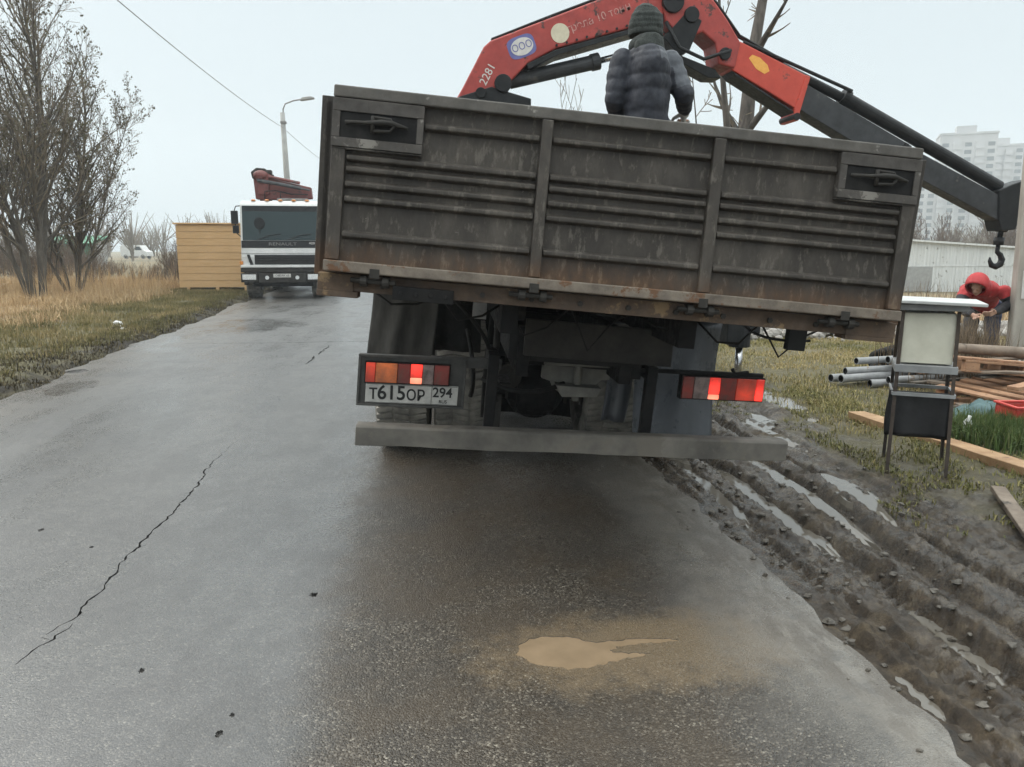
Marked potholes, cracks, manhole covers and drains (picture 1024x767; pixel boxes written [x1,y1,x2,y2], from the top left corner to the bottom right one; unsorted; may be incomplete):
crack [15,447,229,665]
crack [216,341,368,364]
pothole [516,636,679,670]
